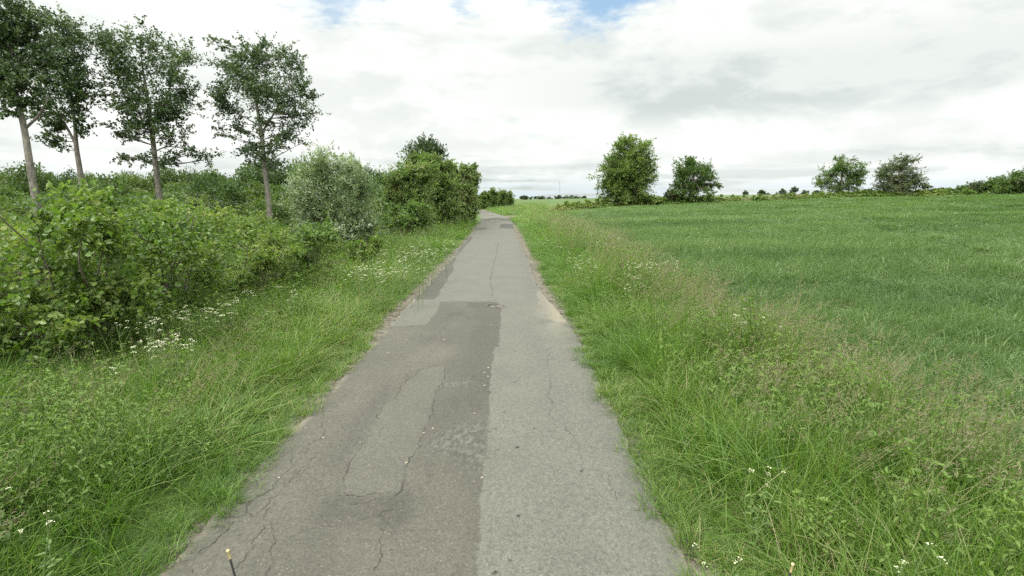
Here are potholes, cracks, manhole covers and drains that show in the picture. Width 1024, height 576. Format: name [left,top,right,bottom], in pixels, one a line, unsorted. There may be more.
crack [165,407,325,574]
crack [343,365,445,571]
